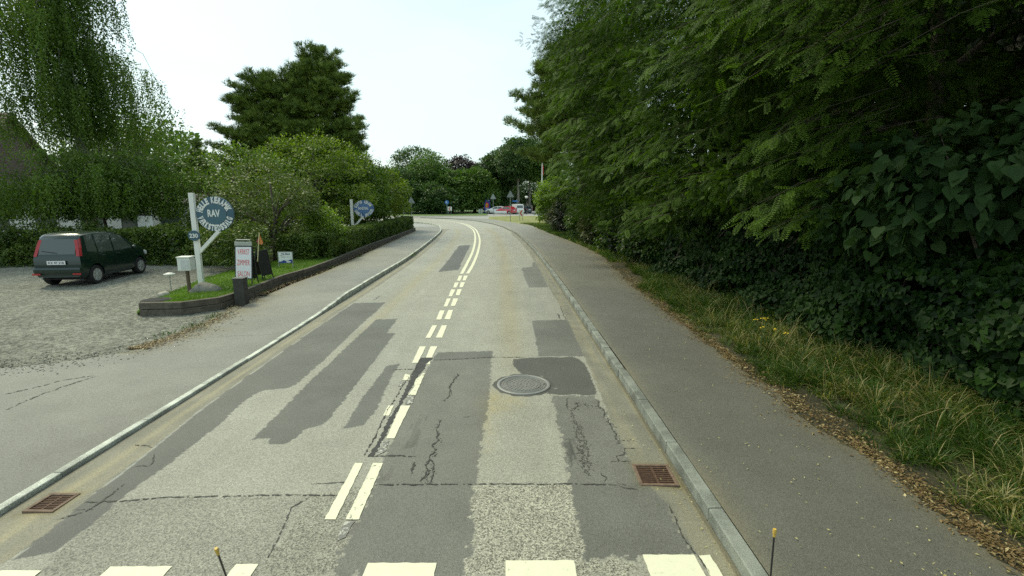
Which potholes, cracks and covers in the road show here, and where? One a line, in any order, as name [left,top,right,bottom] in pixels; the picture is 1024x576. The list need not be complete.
drain grate [22,493,81,513]
crack [368,399,638,490]
crack [6,376,89,410]
drain grate [632,464,680,487]
manhole cover [497,375,551,395]
